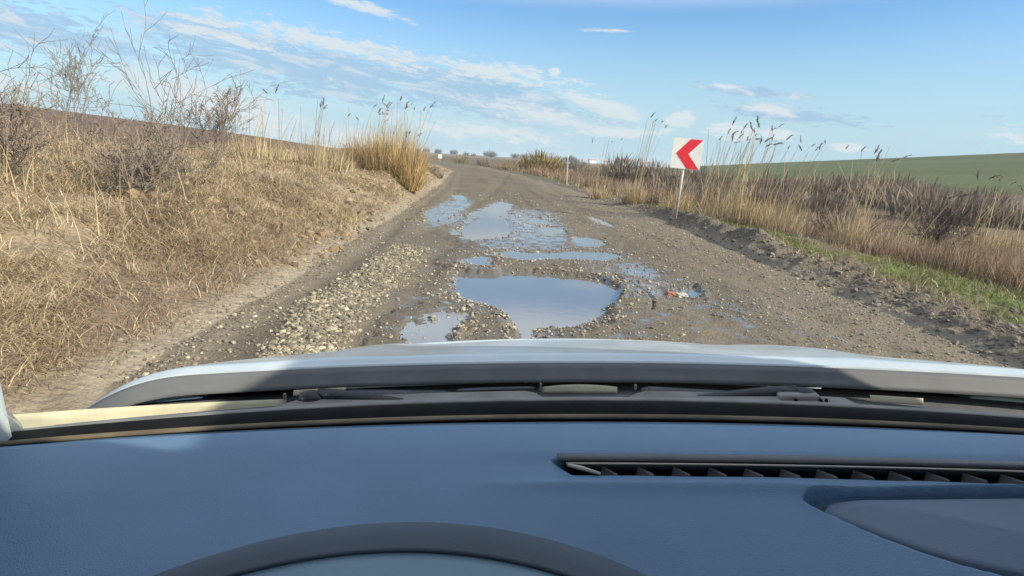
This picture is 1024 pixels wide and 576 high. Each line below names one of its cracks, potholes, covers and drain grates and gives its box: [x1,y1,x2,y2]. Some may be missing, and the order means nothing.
pothole [446,200,526,240]
pothole [397,308,481,344]
pothole [426,265,627,340]
pothole [566,235,611,247]
pothole [459,254,495,265]
pothole [523,217,553,225]
pothole [479,249,625,261]
pothole [588,216,616,227]
pothole [530,225,570,235]
